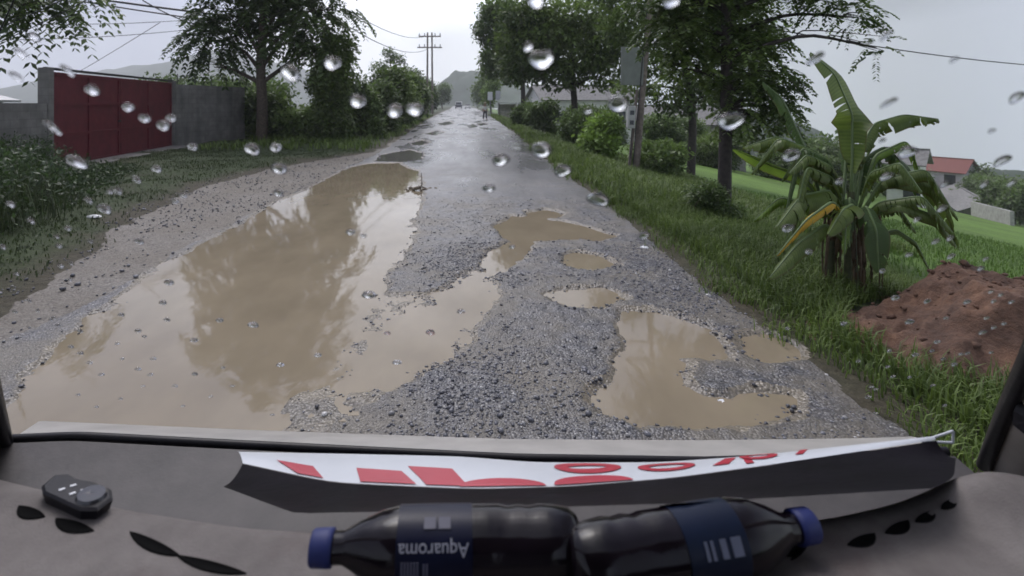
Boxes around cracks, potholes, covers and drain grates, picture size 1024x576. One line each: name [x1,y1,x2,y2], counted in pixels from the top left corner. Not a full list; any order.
pothole [580,304,753,432]
pothole [540,283,634,309]
pothole [372,149,425,162]
pothole [731,326,811,363]
pothole [715,380,811,427]
pothole [521,207,570,220]
pothole [478,213,620,274]
pothole [5,161,505,434]
